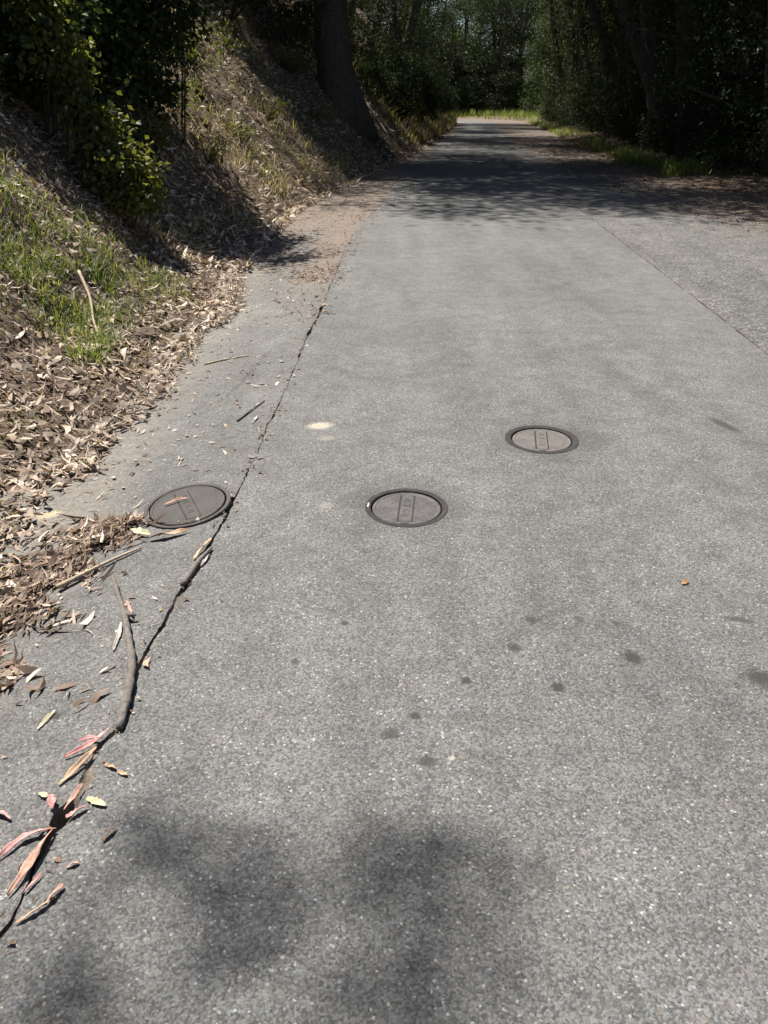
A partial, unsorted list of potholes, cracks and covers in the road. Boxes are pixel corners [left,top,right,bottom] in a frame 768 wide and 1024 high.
crack [0,234,354,942]
manhole cover [365,488,448,528]
manhole cover [505,425,579,454]
manhole cover [143,483,233,529]
